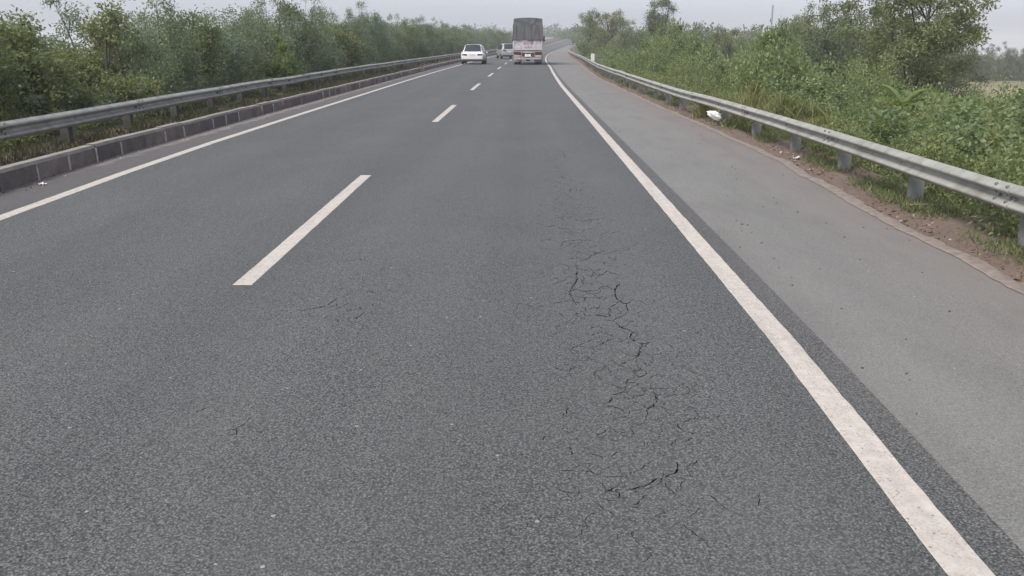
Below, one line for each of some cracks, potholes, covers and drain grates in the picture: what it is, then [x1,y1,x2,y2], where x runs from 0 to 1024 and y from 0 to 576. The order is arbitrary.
crack [300,246,411,354]
